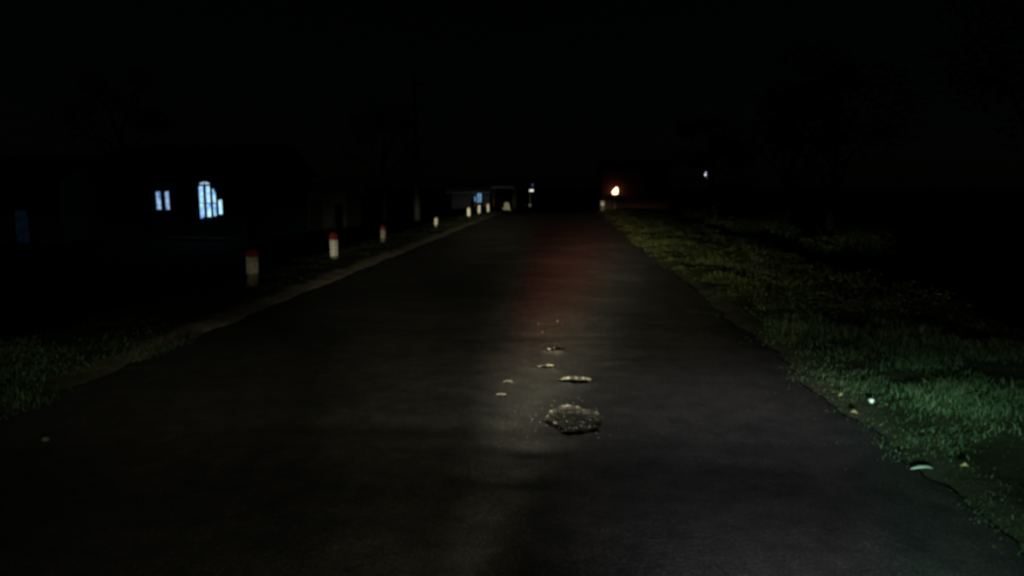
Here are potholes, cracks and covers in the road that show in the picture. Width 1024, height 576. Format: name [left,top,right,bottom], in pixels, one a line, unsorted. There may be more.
pothole [543,405,604,436]
